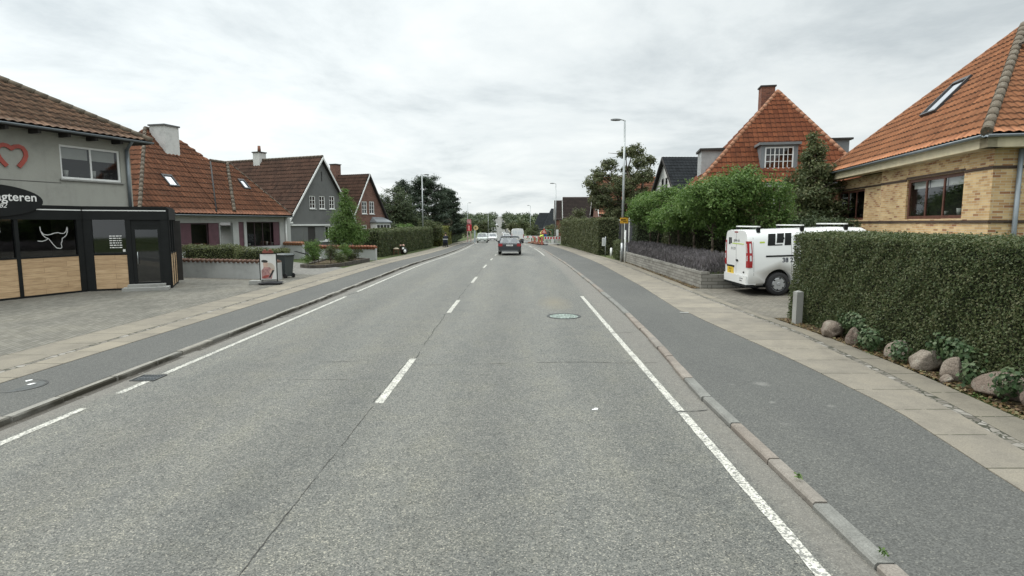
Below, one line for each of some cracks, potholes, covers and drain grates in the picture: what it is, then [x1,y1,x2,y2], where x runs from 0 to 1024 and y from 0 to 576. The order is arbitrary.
manhole cover [0,379,49,393]
